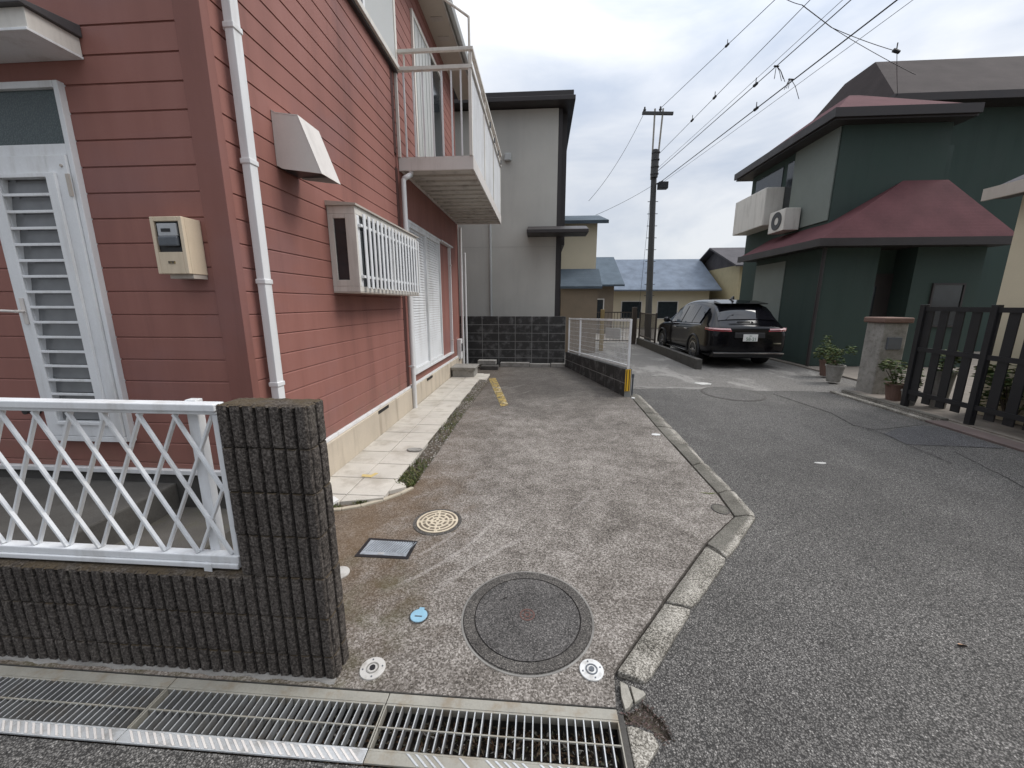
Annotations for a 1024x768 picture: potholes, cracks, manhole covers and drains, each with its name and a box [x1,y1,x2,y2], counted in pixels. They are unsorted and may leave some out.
manhole cover [413,509,462,536]
drain grate [116,678,389,764]
utility cover [711,504,730,515]
drain grate [0,665,177,743]
pothole [623,703,672,742]
manhole cover [461,571,594,678]
drain grate [364,693,627,768]
